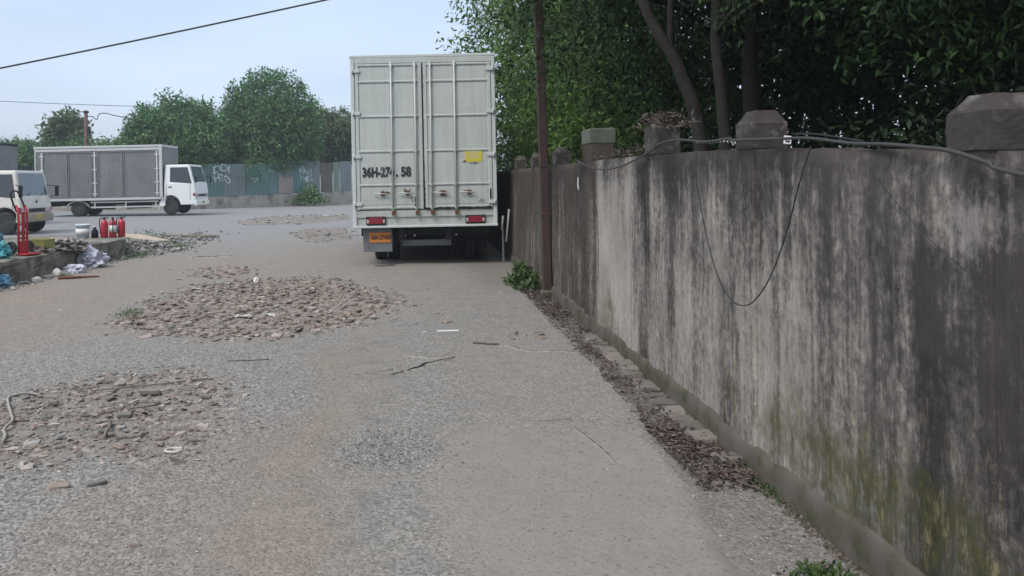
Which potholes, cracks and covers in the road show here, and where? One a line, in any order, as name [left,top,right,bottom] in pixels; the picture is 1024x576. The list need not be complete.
crack [499,344,584,353]
crack [522,418,617,465]
pothole [0,373,219,468]
crack [355,355,455,378]
pothole [129,278,395,338]
pothole [197,267,251,278]
